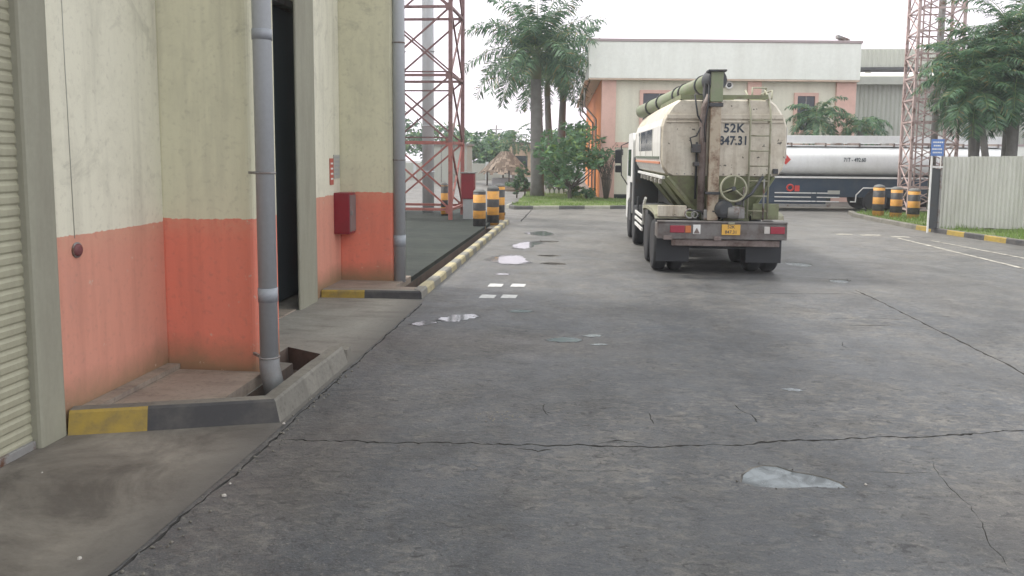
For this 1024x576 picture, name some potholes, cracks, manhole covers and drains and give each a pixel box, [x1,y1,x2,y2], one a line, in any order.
crack [887,463,1008,567]
crack [283,405,1024,452]
